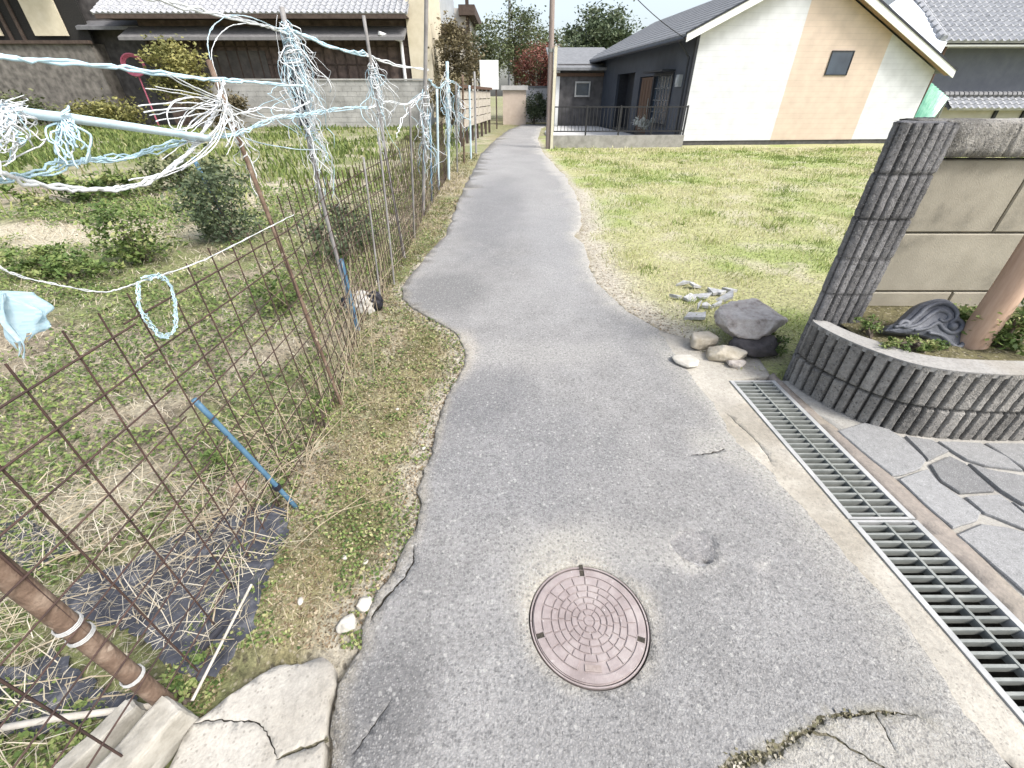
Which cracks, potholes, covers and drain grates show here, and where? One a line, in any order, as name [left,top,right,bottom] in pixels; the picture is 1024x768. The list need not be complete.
drain grate [849,520,1024,724]
crack [718,708,923,768]
drain grate [729,380,916,521]
pothole [669,530,716,567]
manhole cover [529,565,649,691]
